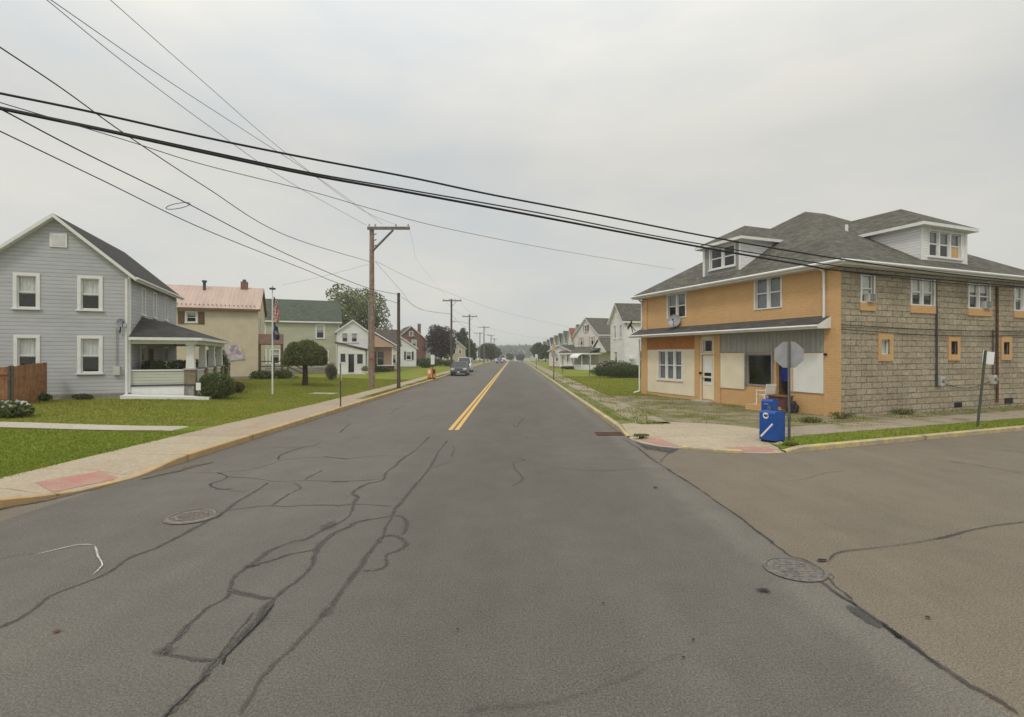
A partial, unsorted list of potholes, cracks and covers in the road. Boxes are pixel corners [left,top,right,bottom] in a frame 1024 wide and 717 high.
crack [165,604,312,717]
manhole cover [163,509,221,524]
crack [828,521,1024,578]
manhole cover [763,557,828,582]
crack [199,446,385,515]
